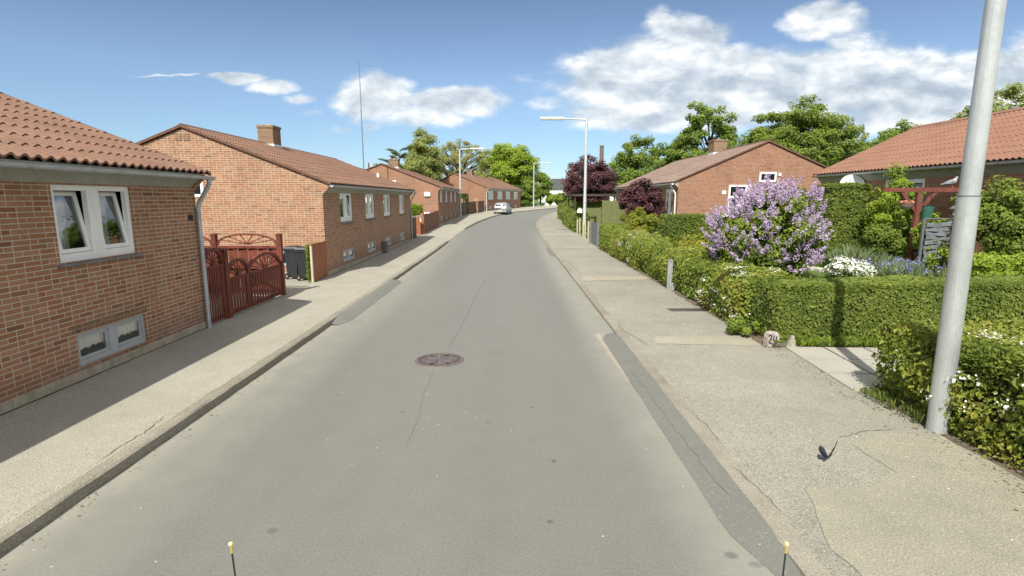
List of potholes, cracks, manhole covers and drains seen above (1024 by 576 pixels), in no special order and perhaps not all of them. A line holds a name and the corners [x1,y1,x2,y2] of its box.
manhole cover [415,353,464,368]
